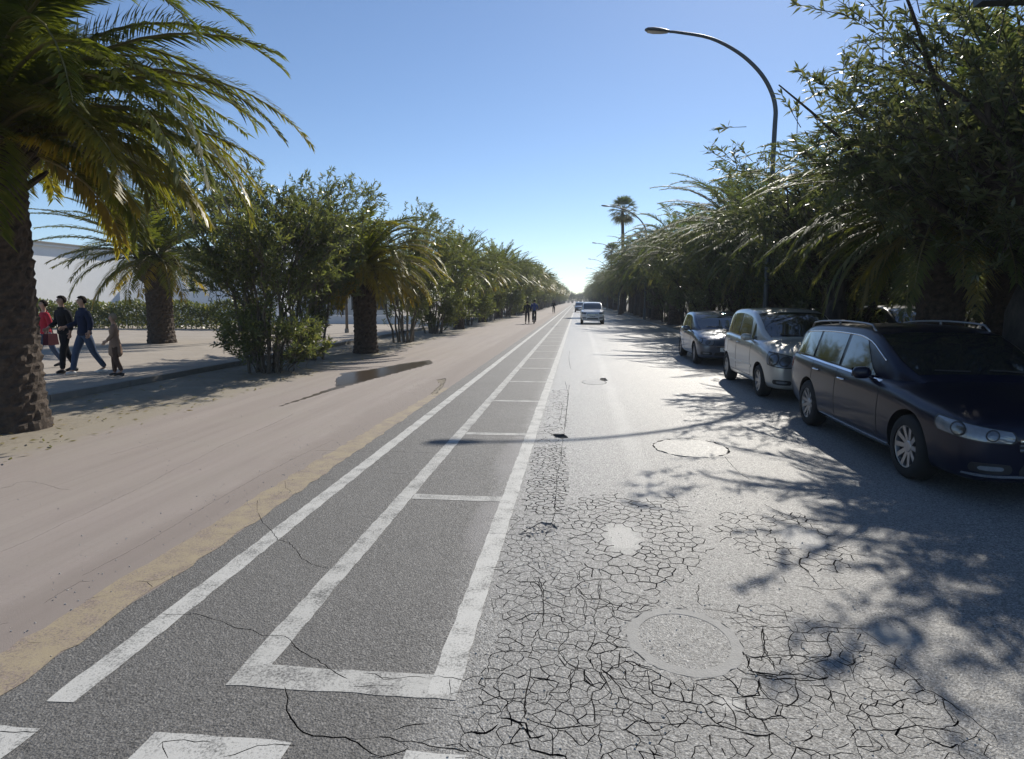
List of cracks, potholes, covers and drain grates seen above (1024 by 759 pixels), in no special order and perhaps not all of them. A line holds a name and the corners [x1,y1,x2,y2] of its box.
pothole [519,522,559,538]
manhole cover [626,608,744,678]
manhole cover [652,438,730,458]
crack [538,351,571,444]
crack [166,444,1011,759]
